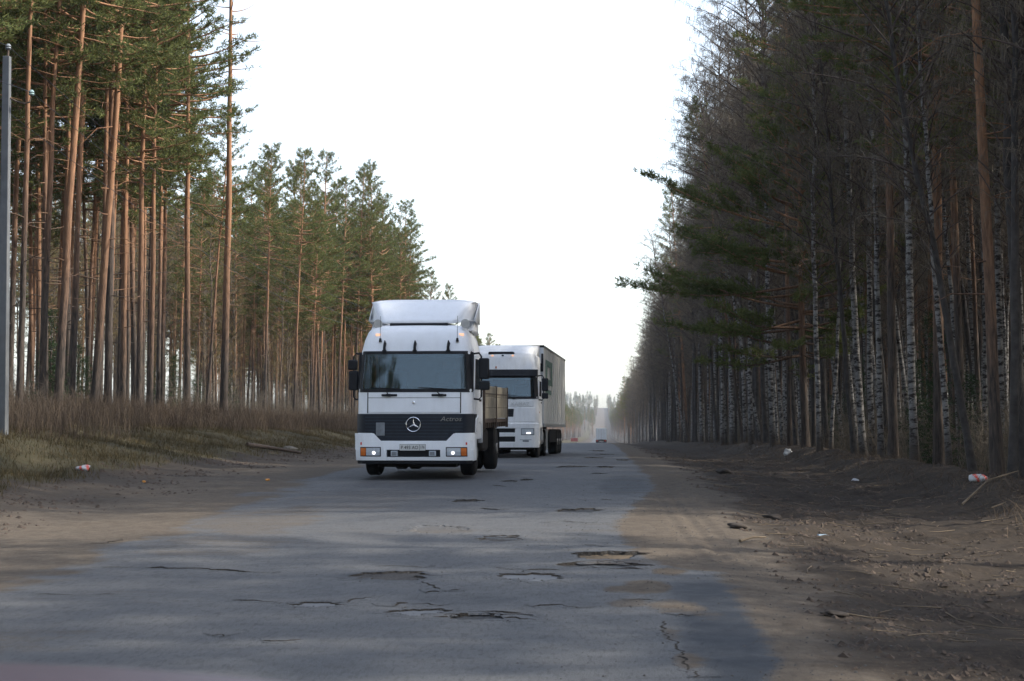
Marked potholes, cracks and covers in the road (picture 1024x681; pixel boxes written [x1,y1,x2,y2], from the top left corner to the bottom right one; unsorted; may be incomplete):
pothole [325,569,452,584]
crack [92,565,279,573]
crack [322,563,462,607]
pothole [408,611,568,623]
pothole [461,534,537,544]
pothole [549,549,671,565]
pothole [482,571,578,584]
pothole [274,601,359,609]
pothole [533,559,683,570]
